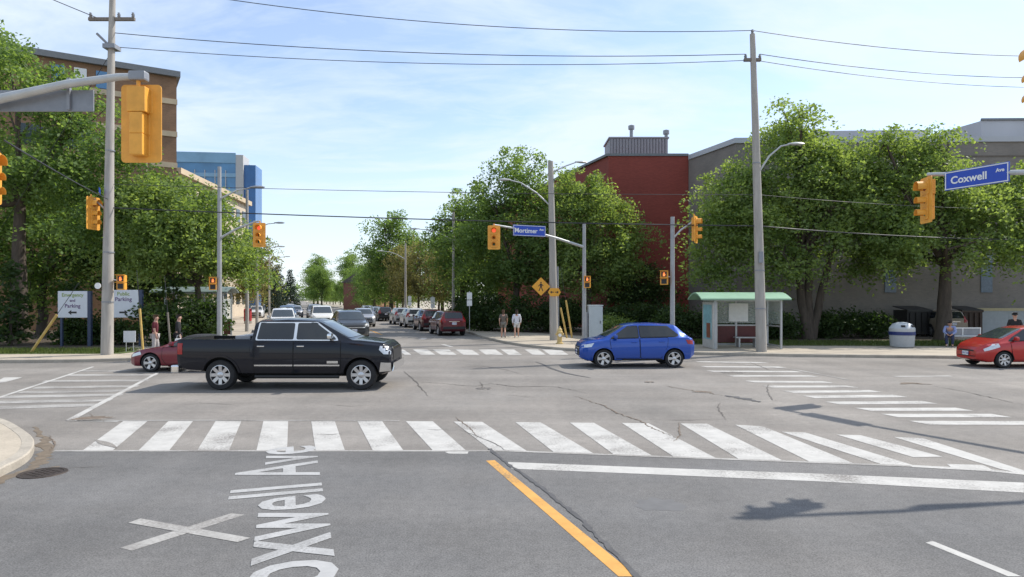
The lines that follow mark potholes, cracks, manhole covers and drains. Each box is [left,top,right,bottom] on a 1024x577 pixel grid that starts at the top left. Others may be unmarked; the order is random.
manhole cover [16,467,69,479]
crack [404,366,725,438]
